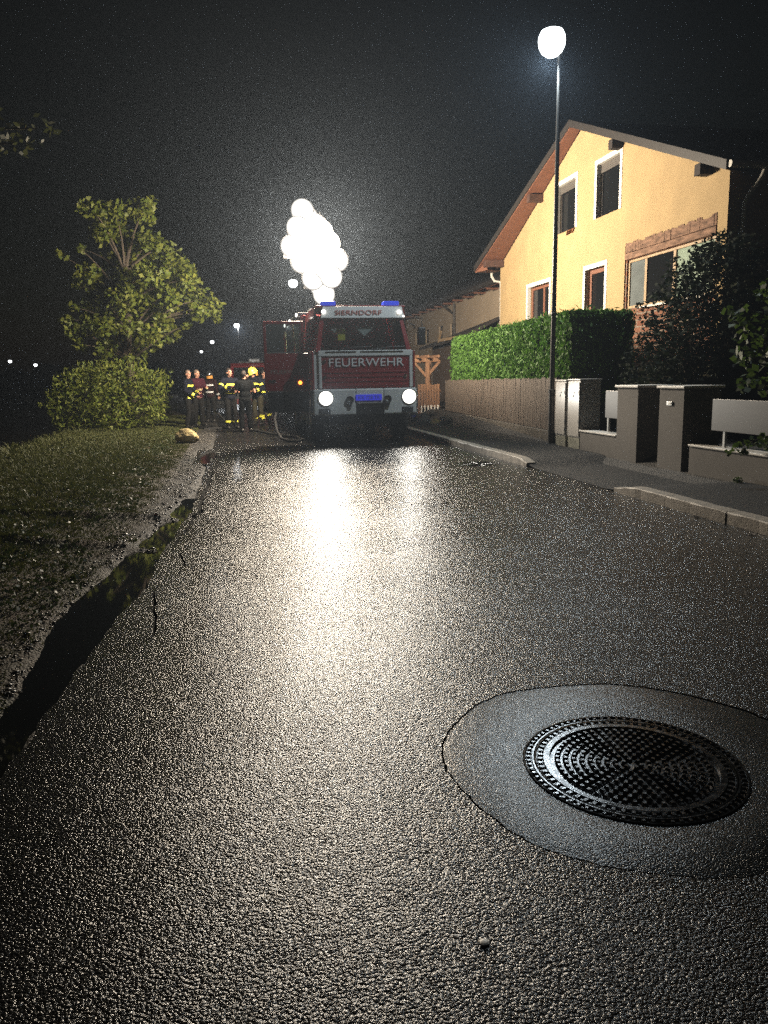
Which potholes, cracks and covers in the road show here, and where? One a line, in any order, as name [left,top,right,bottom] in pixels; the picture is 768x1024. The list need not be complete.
manhole cover [523,716,751,826]
crack [141,586,158,644]
